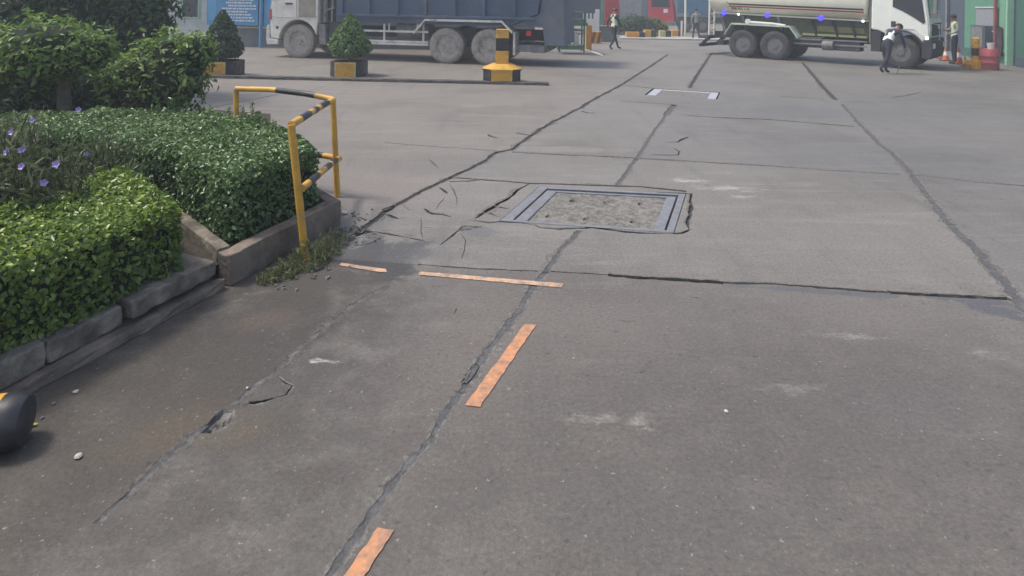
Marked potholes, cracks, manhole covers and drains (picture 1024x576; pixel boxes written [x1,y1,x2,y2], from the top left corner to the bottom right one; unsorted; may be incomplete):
manhole cover [645,88,720,99]
crack [243,375,294,406]
pothole [202,409,237,434]
crack [650,137,689,156]
manhole cover [500,187,686,234]
crack [360,184,695,259]
